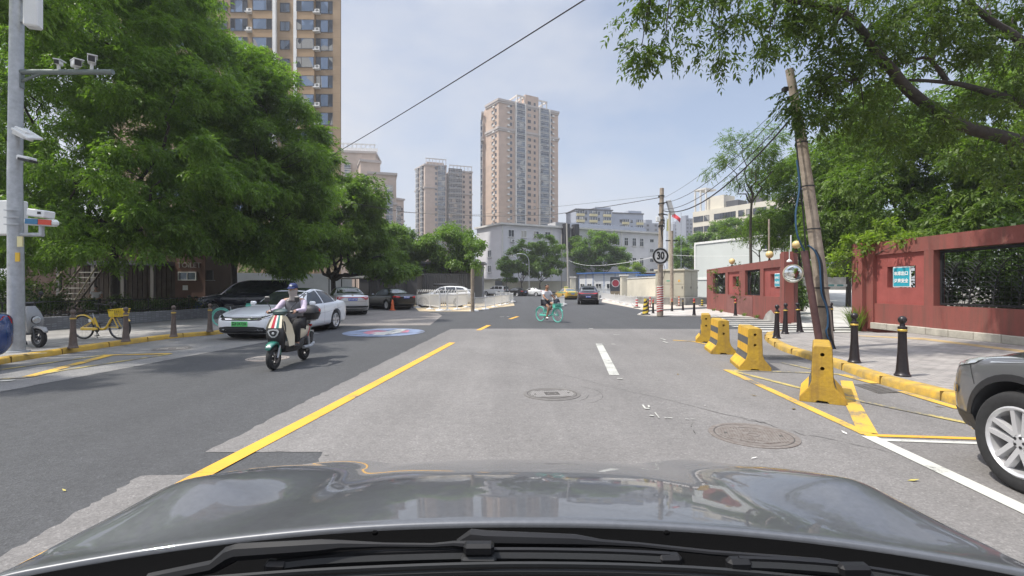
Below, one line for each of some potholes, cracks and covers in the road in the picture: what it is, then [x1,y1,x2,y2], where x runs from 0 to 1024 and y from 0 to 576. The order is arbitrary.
manhole cover [524,388,581,401]
manhole cover [708,423,801,449]
drain grate [854,384,899,394]
